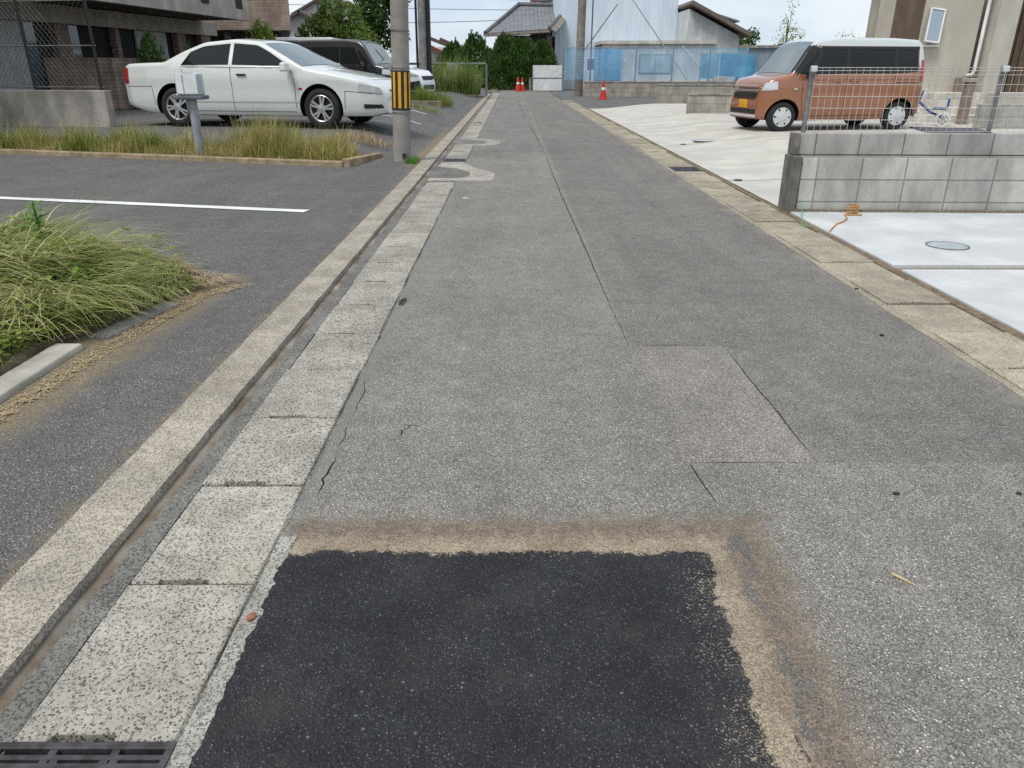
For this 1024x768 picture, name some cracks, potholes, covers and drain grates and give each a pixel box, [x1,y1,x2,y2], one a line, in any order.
manhole cover [925,241,970,251]
drain grate [0,742,177,768]
crack [321,383,365,489]
